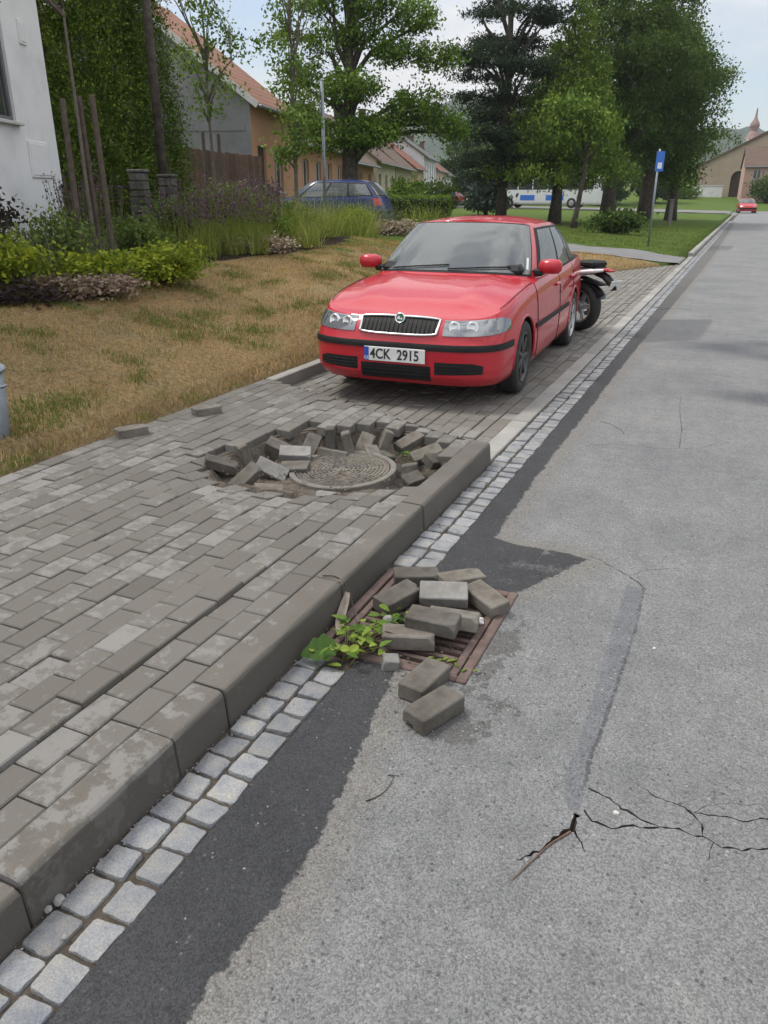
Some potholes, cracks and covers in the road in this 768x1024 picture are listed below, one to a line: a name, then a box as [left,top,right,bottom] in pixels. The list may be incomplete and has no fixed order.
drain grate [326,568,518,685]
crack [585,397,711,449]
crack [589,556,675,590]
pothole [203,427,444,499]
manhole cover [289,450,397,494]
crack [518,782,768,862]
